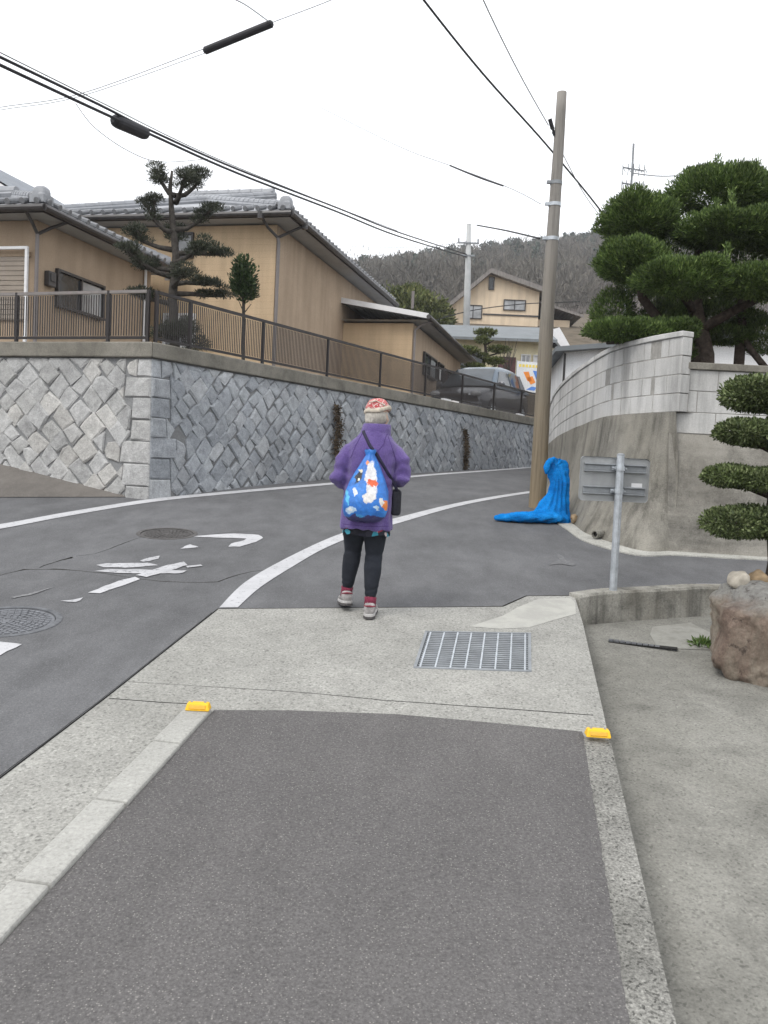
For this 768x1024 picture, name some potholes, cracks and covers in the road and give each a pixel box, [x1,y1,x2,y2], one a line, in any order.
drain grate [413,631,532,672]
manhole cover [0,606,63,637]
manhole cover [136,528,198,540]
